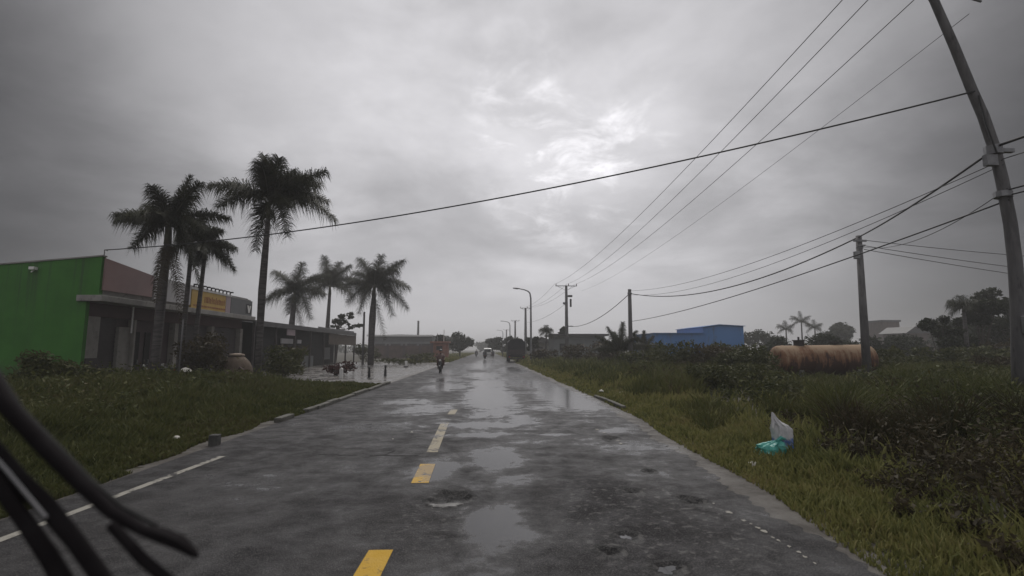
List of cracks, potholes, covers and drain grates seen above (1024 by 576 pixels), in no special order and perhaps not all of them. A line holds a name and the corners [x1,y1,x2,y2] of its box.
pothole [671,493,715,509]
pothole [607,527,645,544]
pothole [588,544,628,559]
pothole [615,486,646,497]
pothole [422,489,478,504]
